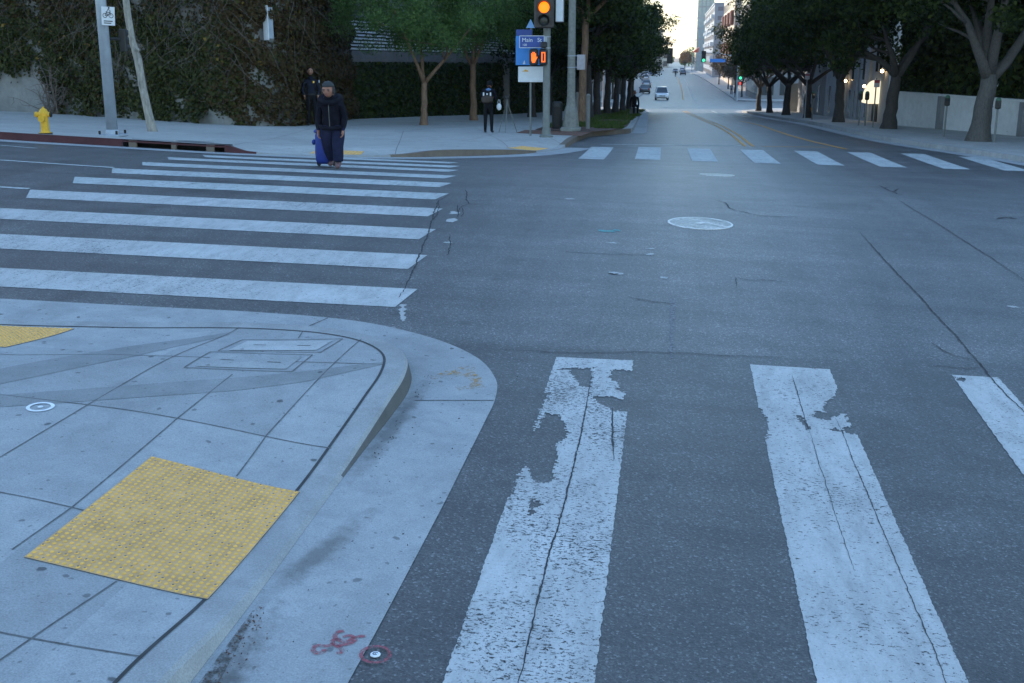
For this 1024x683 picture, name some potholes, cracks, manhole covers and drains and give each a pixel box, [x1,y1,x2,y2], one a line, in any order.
crack [835,418,946,683]
utility cover [218,338,343,352]
crack [399,190,495,297]
crack [881,186,1023,279]
crack [518,375,592,683]
utility cover [184,351,312,372]
manhole cover [667,217,733,230]
crack [860,232,1024,412]
drain grate [123,139,233,153]
crack [792,377,855,571]
